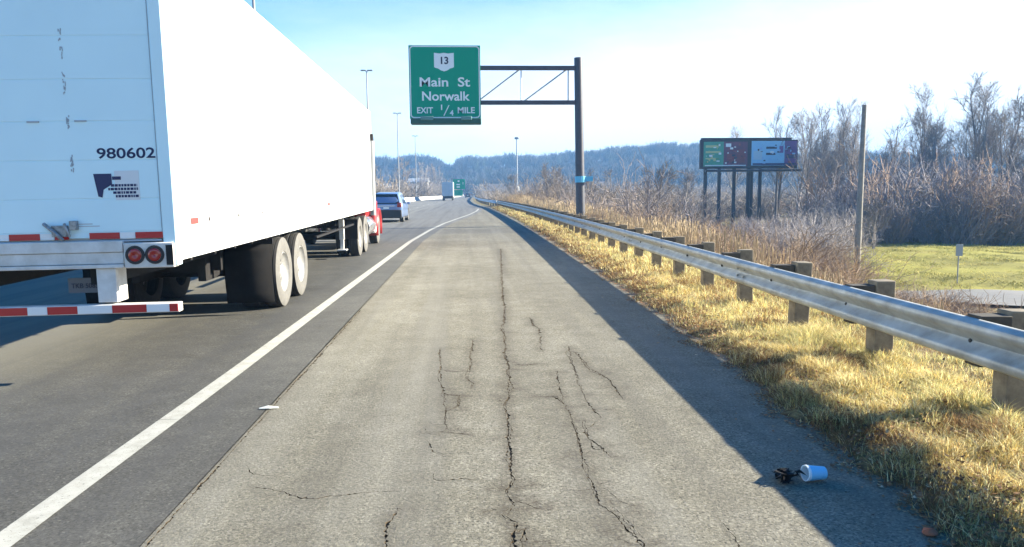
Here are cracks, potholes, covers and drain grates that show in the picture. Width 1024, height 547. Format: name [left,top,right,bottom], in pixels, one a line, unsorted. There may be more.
crack [425,339,476,454]
crack [533,346,663,547]
crack [248,468,398,547]
crack [490,249,540,547]
